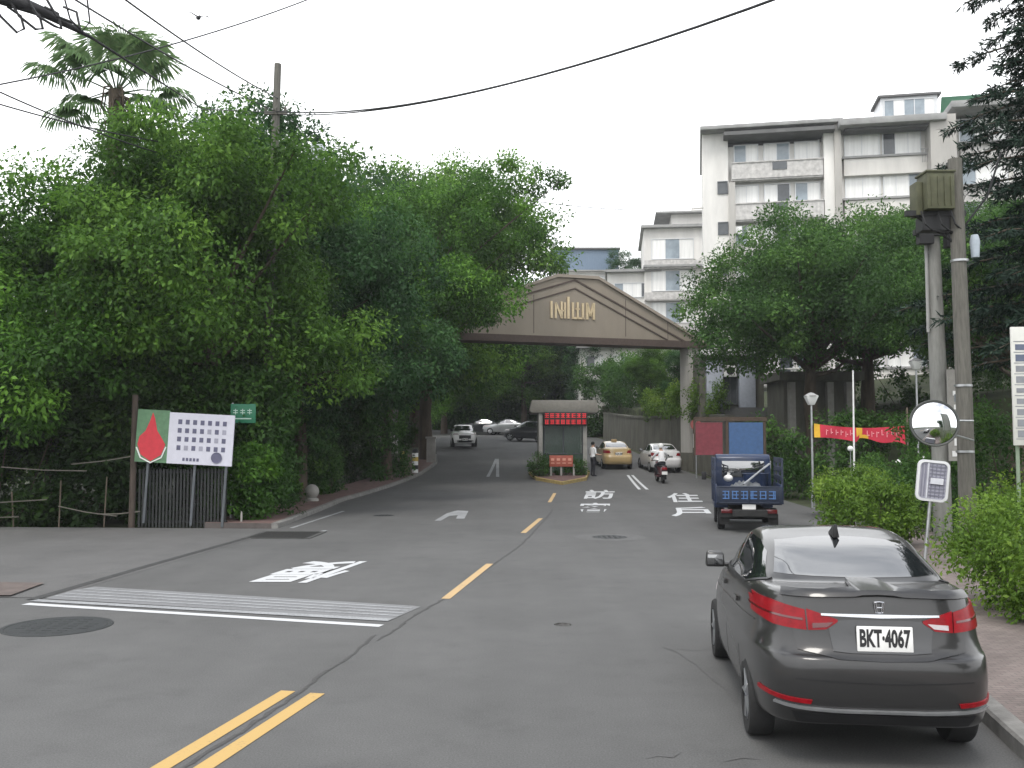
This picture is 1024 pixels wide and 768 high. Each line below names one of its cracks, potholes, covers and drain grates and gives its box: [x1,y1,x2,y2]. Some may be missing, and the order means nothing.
manhole cover [0,616,114,637]
crack [662,647,736,703]
crack [182,510,553,768]
